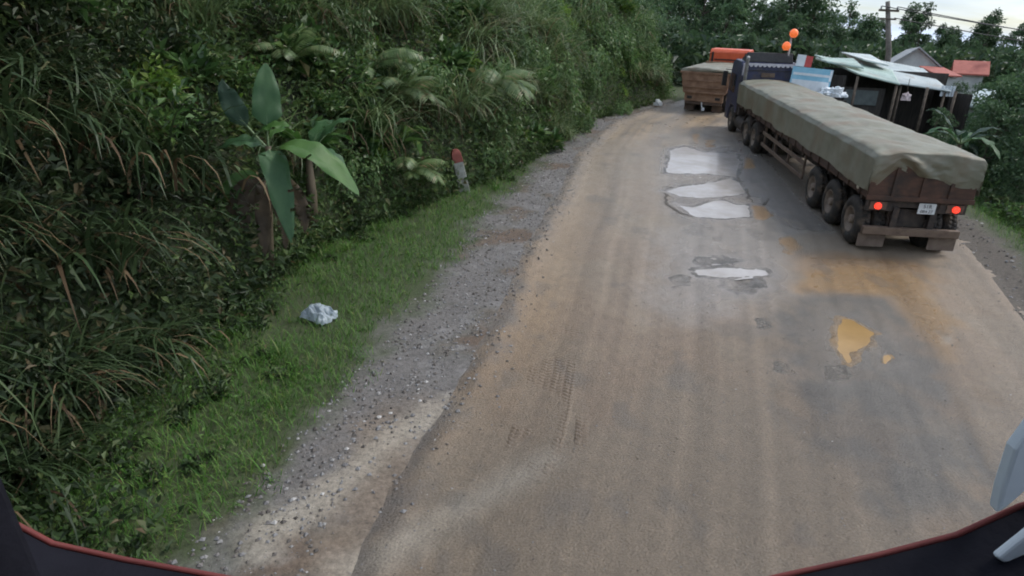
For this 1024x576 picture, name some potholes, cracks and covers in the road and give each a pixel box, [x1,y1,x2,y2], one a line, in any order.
pothole [662,146,744,178]
pothole [829,315,882,367]
pothole [662,176,749,199]
pothole [677,199,754,220]
pothole [692,254,745,267]
pothole [687,264,773,281]
